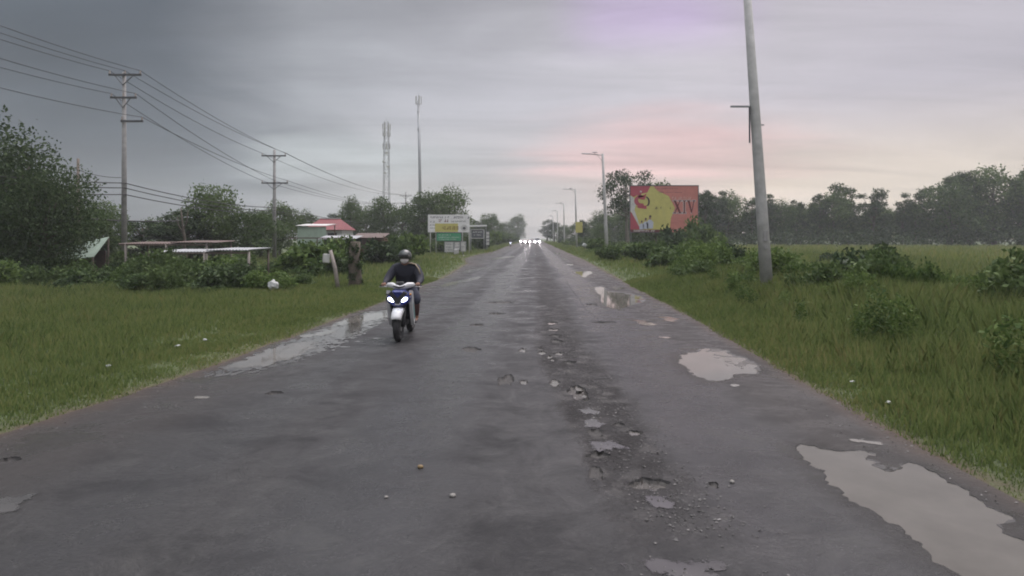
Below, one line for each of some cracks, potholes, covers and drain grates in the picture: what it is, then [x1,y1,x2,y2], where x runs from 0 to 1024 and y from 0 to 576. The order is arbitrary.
pothole [566,384,590,401]
pothole [628,477,670,491]
pothole [589,466,604,481]
pothole [497,374,514,385]
